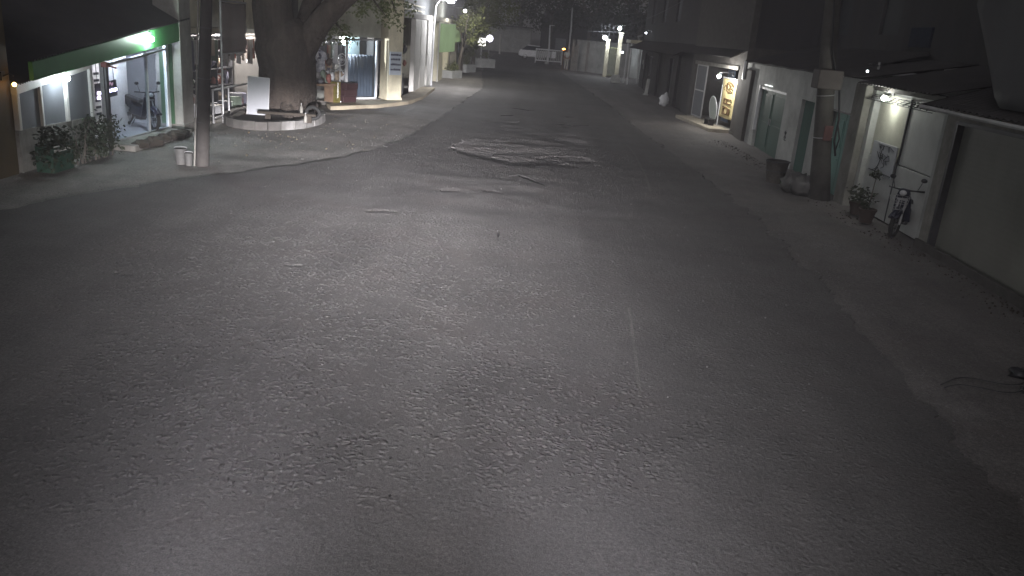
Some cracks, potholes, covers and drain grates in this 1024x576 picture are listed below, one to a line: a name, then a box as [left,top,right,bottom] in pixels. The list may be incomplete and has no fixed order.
crack [509,175,544,185]
